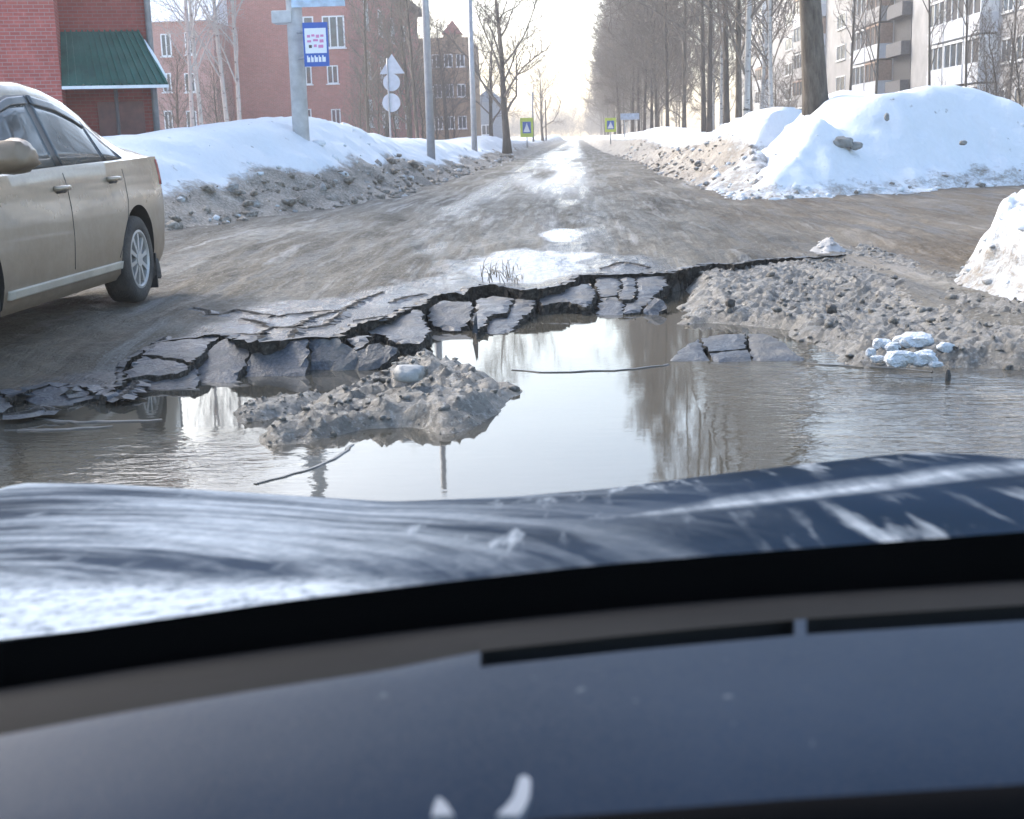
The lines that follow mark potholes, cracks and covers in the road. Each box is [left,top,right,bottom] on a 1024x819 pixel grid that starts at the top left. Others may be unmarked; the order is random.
crack [596,262,662,274]
crack [2,336,172,432]
crack [187,291,429,340]
pothole [0,271,673,416]
